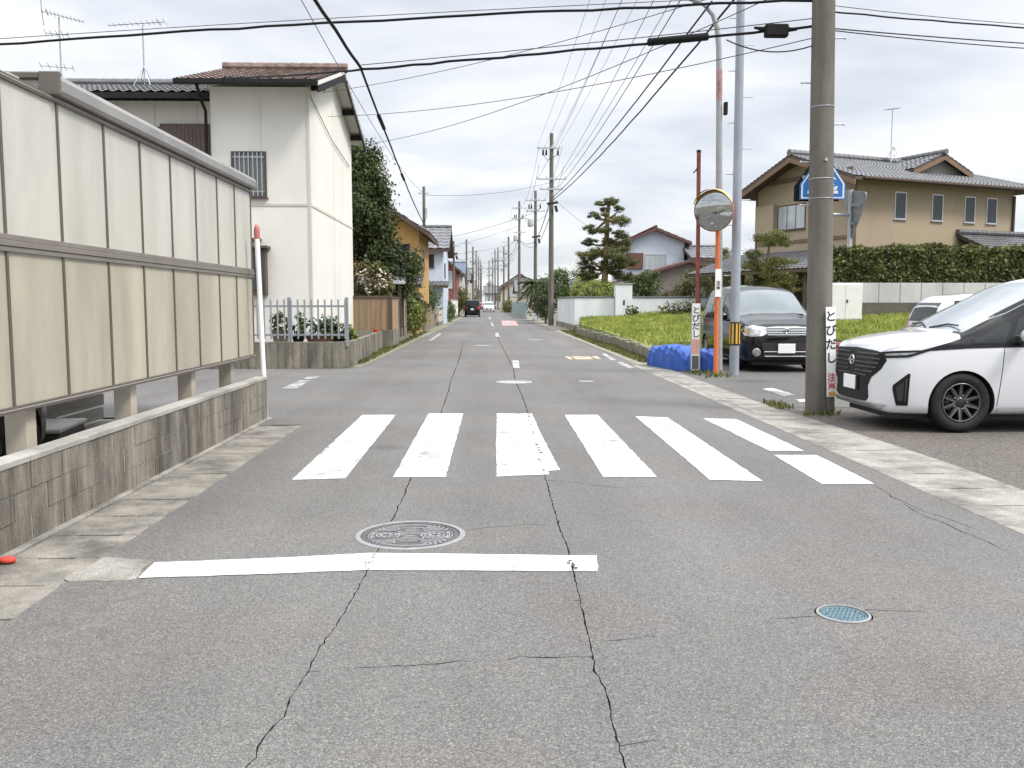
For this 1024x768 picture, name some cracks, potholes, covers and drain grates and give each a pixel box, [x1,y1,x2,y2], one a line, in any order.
crack [245,345,481,768]
manhole cover [355,521,465,550]
manhole cover [816,604,871,624]
